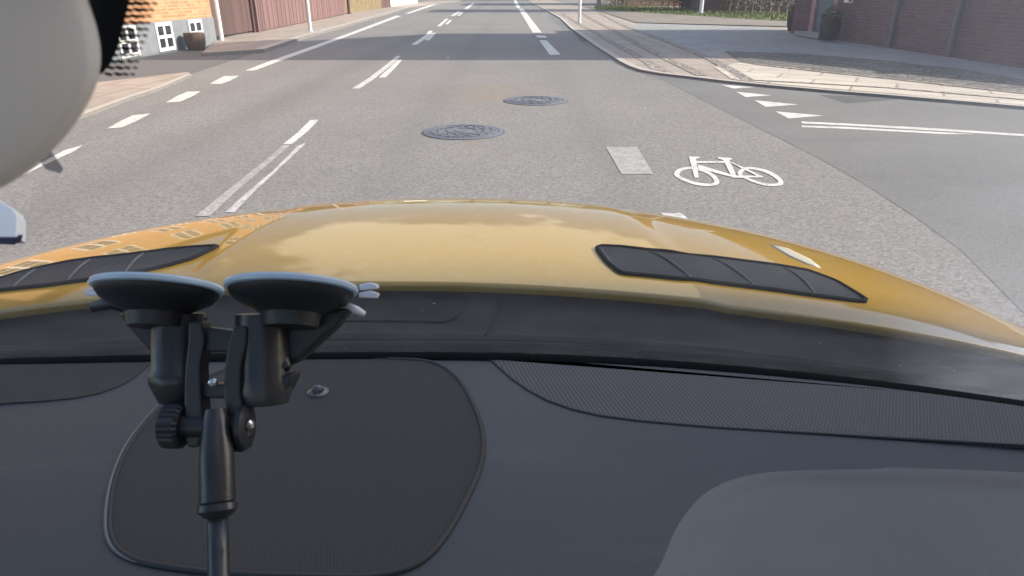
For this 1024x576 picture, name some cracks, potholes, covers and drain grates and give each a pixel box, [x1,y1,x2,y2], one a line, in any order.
manhole cover [421,124,505,140]
manhole cover [503,96,568,106]
